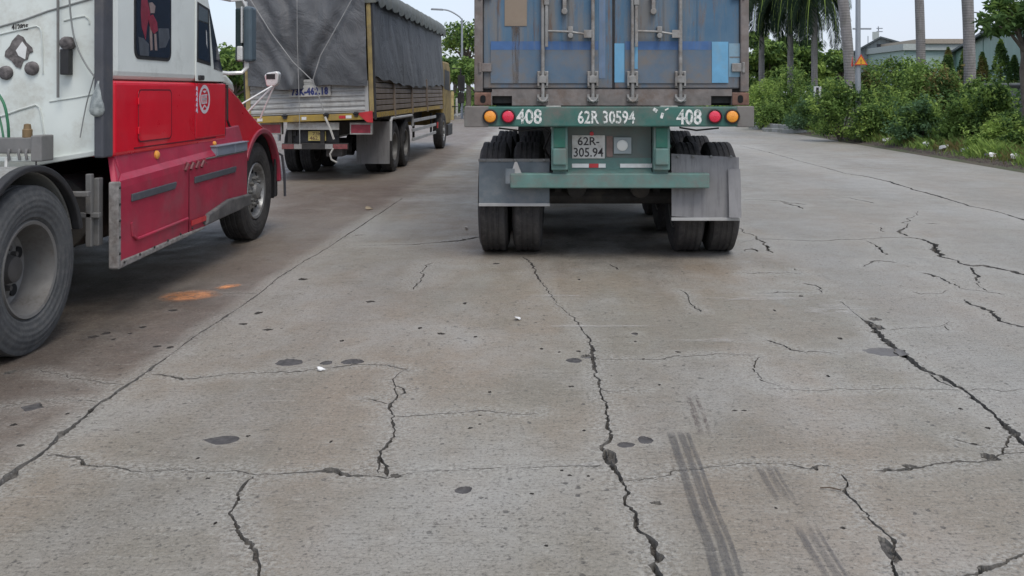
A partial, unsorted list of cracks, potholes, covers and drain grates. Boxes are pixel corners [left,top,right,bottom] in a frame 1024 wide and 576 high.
crack [47,364,538,576]
crack [740,212,1024,327]
crack [523,257,1024,576]
